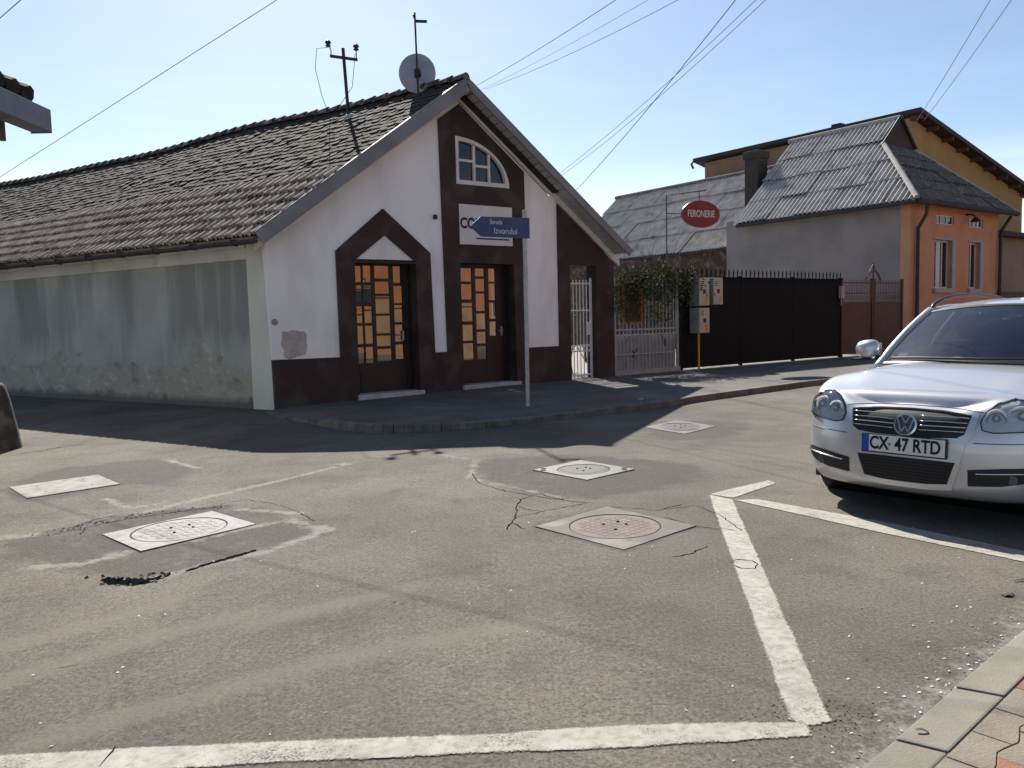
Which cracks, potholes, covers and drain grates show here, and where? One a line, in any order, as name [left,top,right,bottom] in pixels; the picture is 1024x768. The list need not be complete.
manhole cover [645,420,716,434]
manhole cover [534,460,635,480]
manhole cover [102,511,256,552]
crack [53,500,315,535]
crack [614,504,742,557]
manhole cover [9,475,120,499]
crack [472,473,594,530]
pothole [100,572,171,587]
manhole cover [535,506,696,550]
